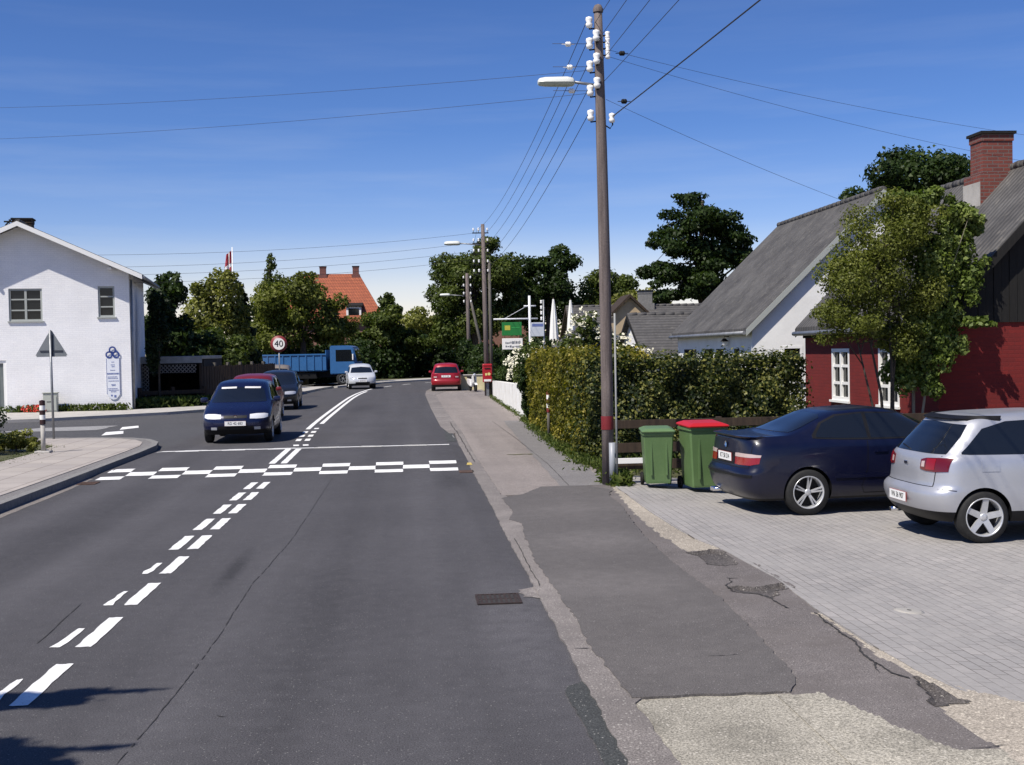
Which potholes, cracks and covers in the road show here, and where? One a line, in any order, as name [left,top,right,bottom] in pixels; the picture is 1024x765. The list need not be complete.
drain grate [475,593,522,605]
pothole [912,676,971,707]
pothole [686,549,738,566]
crack [814,612,909,678]
pothole [727,583,795,598]
